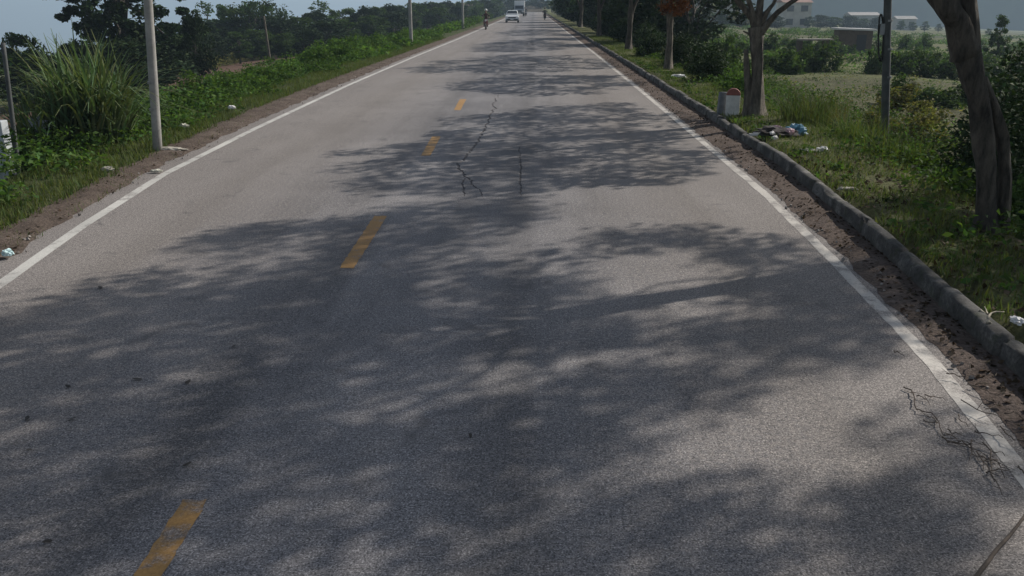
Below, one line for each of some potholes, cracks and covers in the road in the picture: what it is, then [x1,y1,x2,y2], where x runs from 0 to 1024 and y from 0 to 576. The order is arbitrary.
crack [456,95,499,197]
